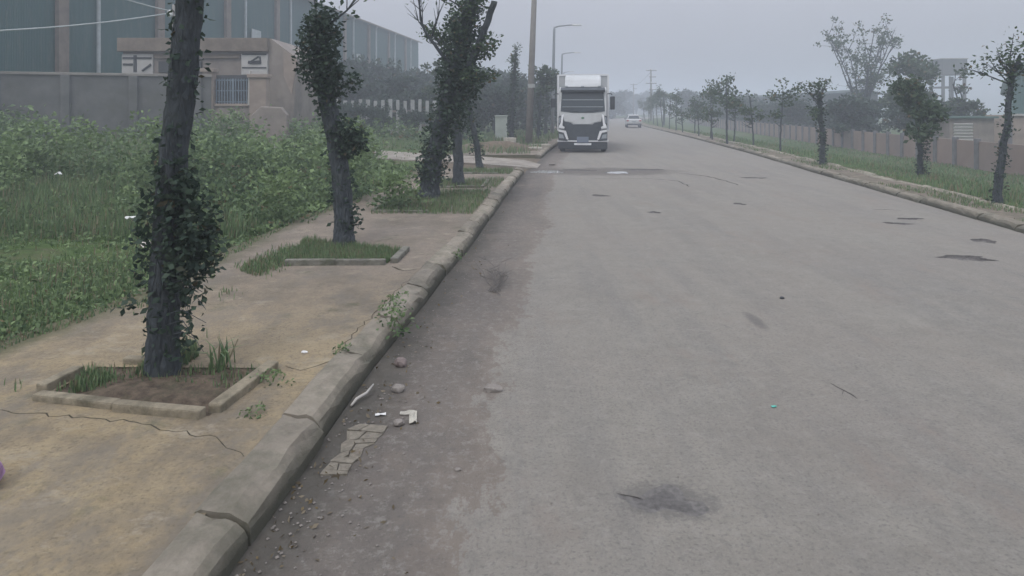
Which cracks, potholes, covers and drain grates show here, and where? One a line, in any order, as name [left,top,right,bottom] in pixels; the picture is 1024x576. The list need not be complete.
crack [594,173,738,187]
crack [2,409,244,457]
